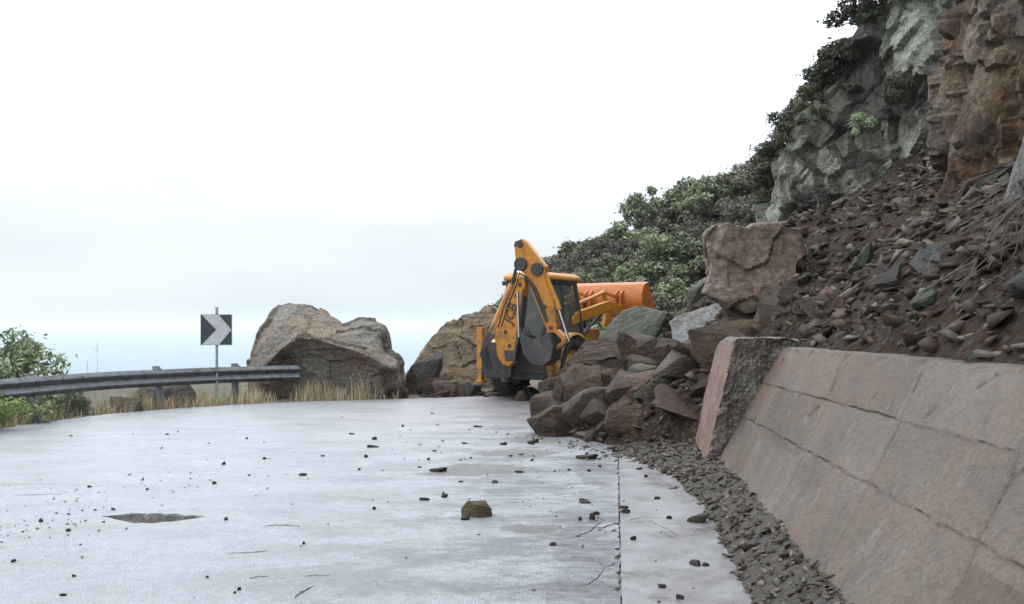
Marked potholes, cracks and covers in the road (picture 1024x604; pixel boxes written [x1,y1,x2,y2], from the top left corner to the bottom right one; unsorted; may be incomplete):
pothole [110,514,200,524]
crack [294,574,330,598]
